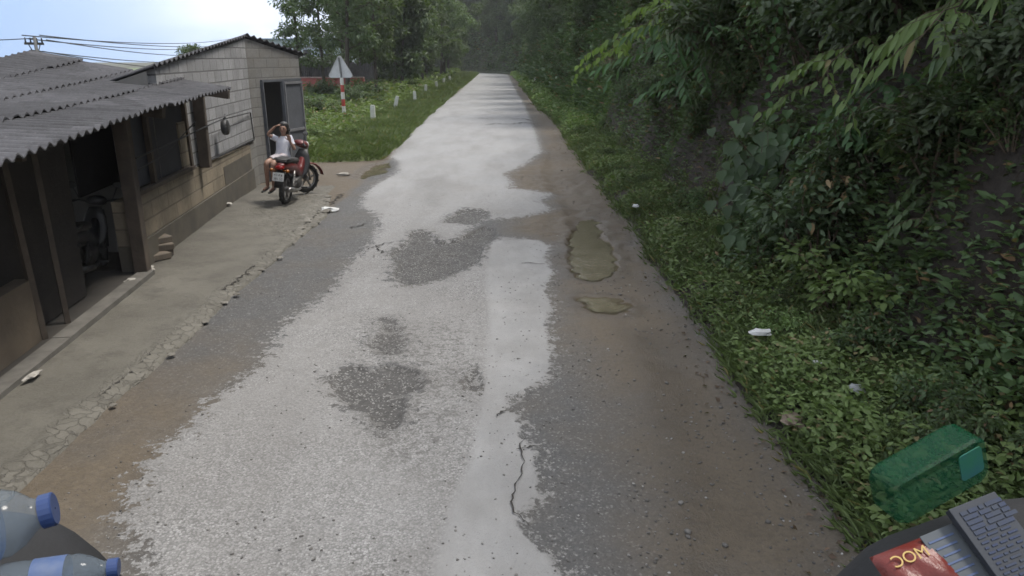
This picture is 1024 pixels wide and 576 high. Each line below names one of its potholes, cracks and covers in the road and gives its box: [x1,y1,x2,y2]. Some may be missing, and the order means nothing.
pothole [562,219,622,283]
crack [510,438,534,525]
pothole [570,294,637,315]
